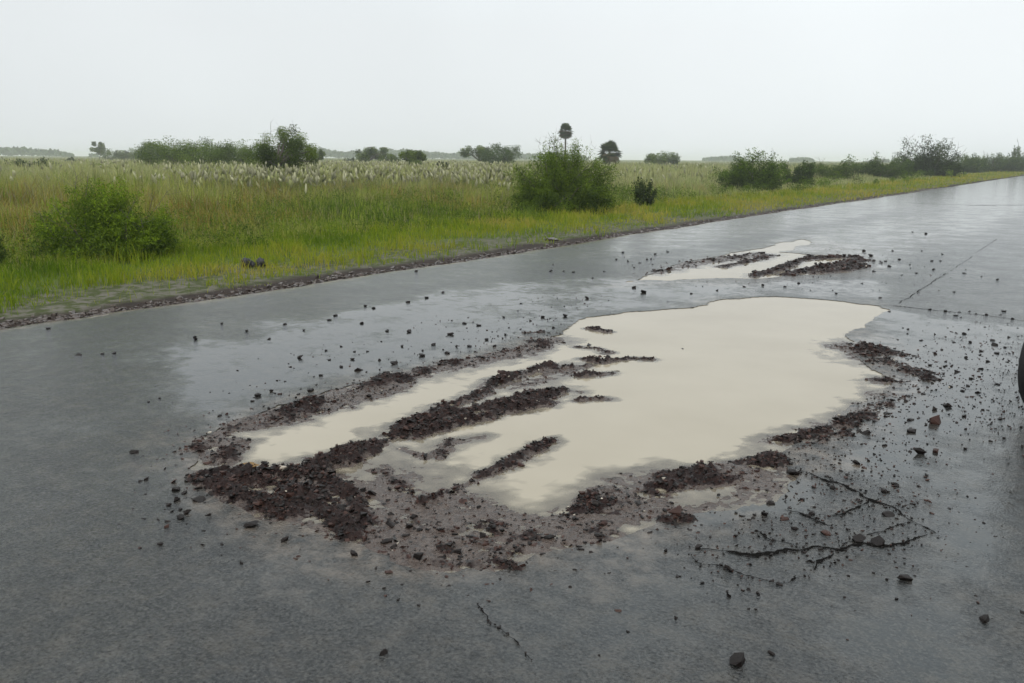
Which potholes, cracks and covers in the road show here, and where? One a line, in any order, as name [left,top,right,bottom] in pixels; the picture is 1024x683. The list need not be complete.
pothole [114,296,981,612]
crack [689,467,940,586]
pothole [627,239,881,282]
